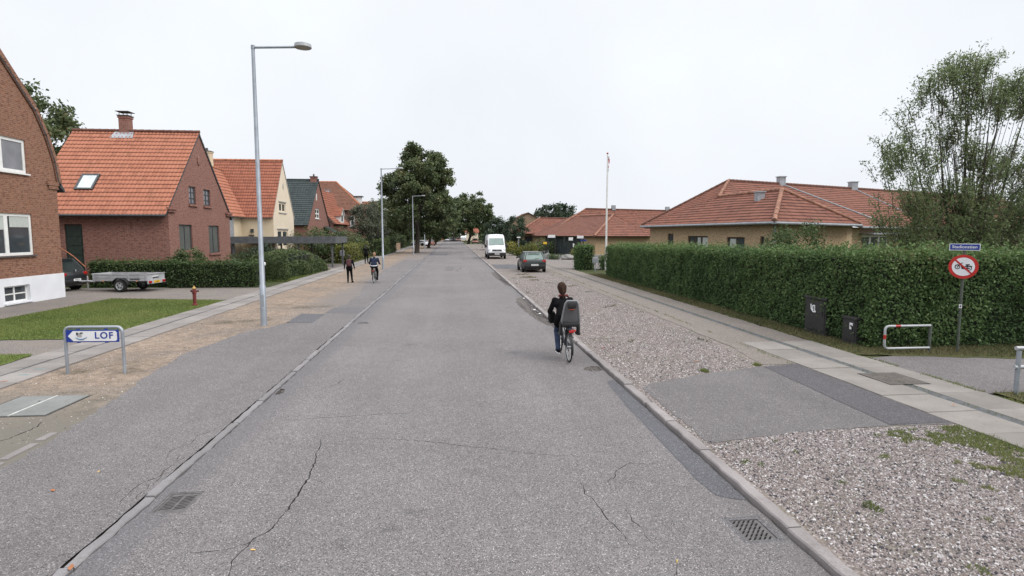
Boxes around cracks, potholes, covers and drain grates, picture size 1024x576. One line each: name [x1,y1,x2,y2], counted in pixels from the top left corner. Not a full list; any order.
drain grate [149,492,204,514]
crack [120,424,225,502]
manhole cover [0,395,92,418]
manhole cover [857,372,930,385]
crack [583,463,654,545]
crack [198,439,323,576]
drain grate [721,516,786,544]
